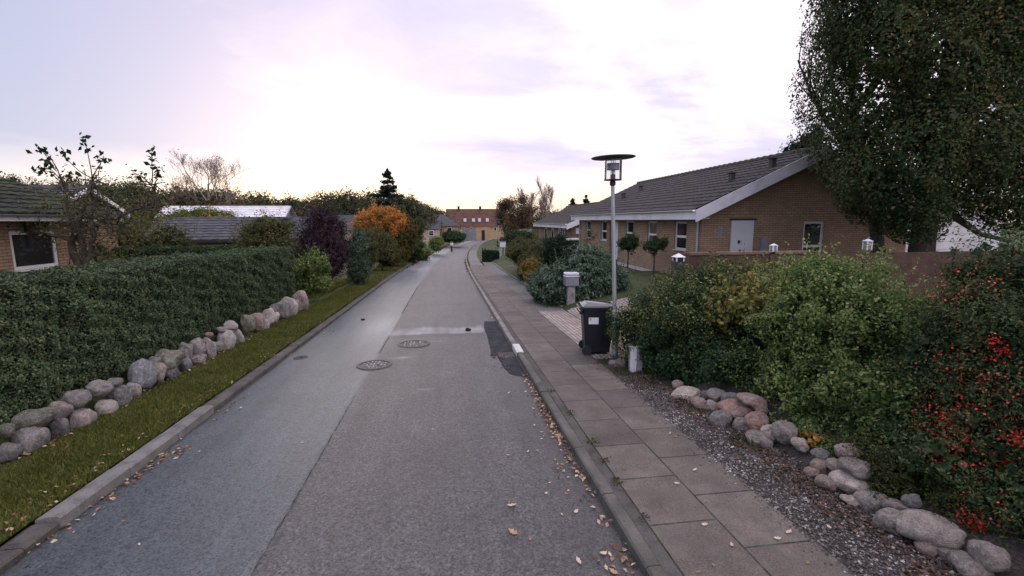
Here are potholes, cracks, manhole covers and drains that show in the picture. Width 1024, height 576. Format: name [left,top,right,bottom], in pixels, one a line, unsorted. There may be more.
manhole cover [397,340,430,348]
manhole cover [356,360,392,370]
